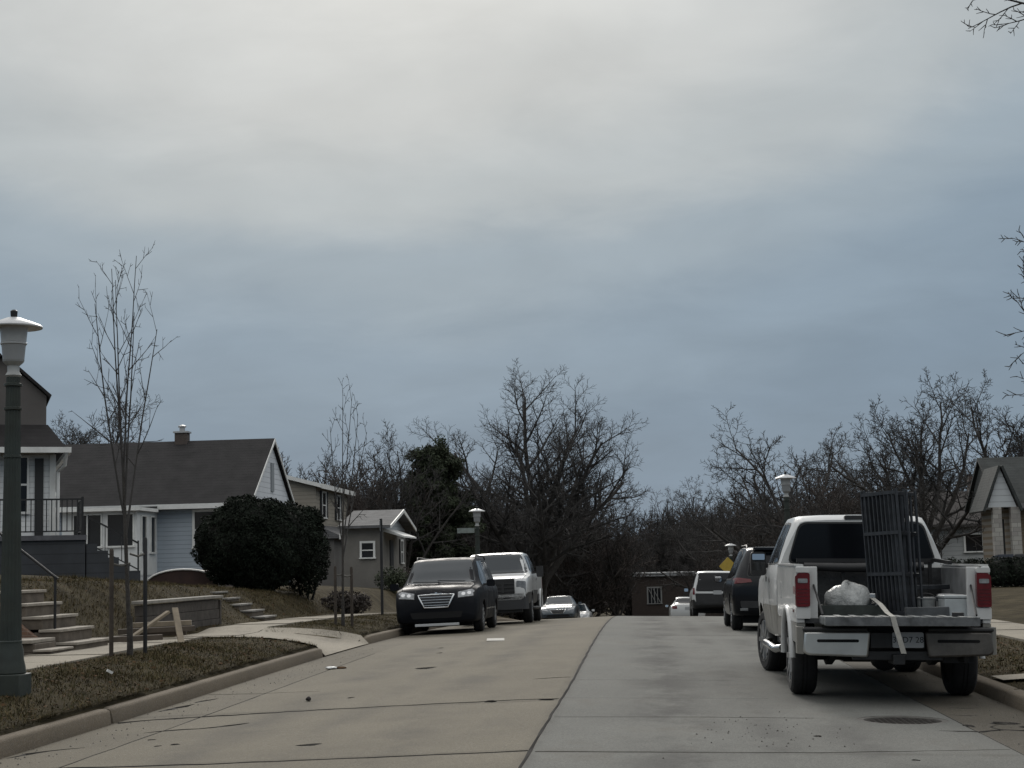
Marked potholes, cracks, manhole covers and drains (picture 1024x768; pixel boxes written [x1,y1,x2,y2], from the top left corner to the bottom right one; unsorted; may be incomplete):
manhole cover [858,716,948,725]
